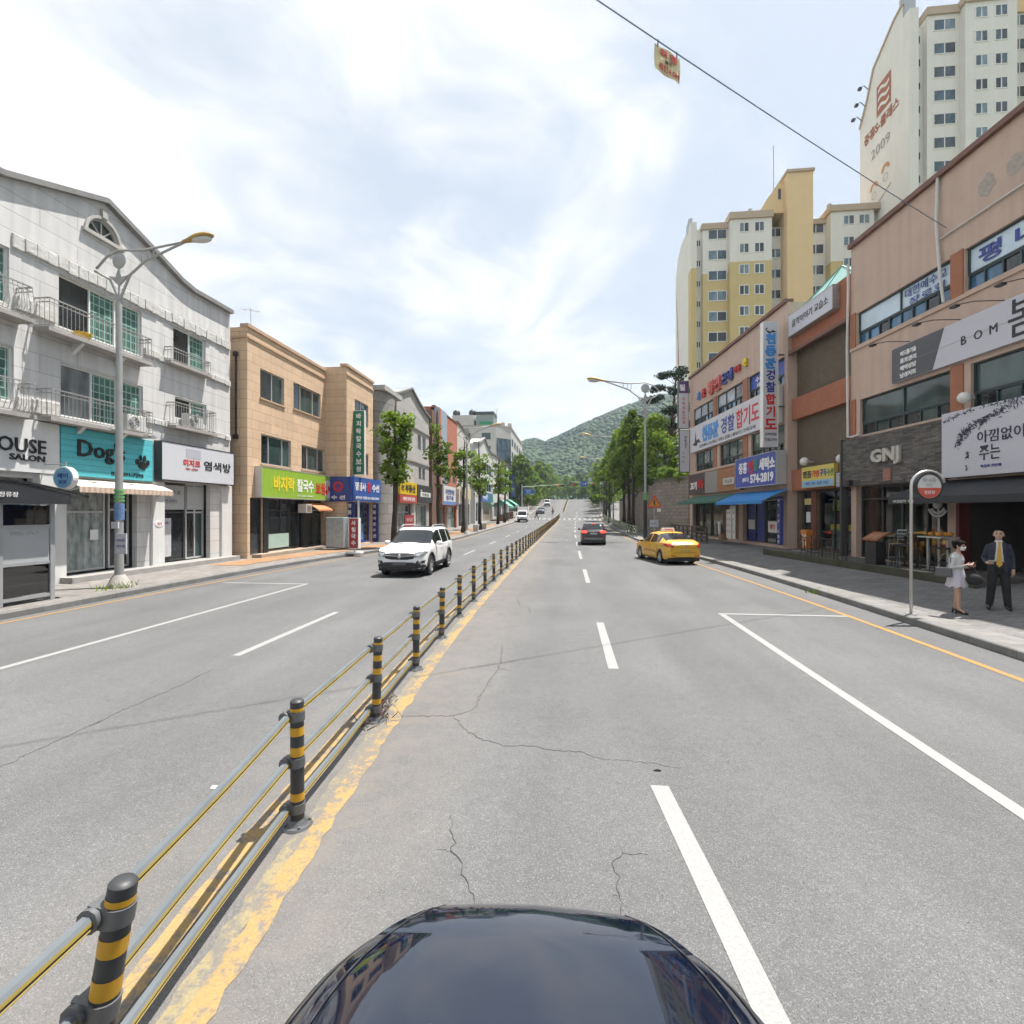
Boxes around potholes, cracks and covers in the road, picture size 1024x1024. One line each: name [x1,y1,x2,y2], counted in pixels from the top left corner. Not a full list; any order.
crack [428,646,675,768]
crack [612,853,646,914]
crack [437,814,475,904]
